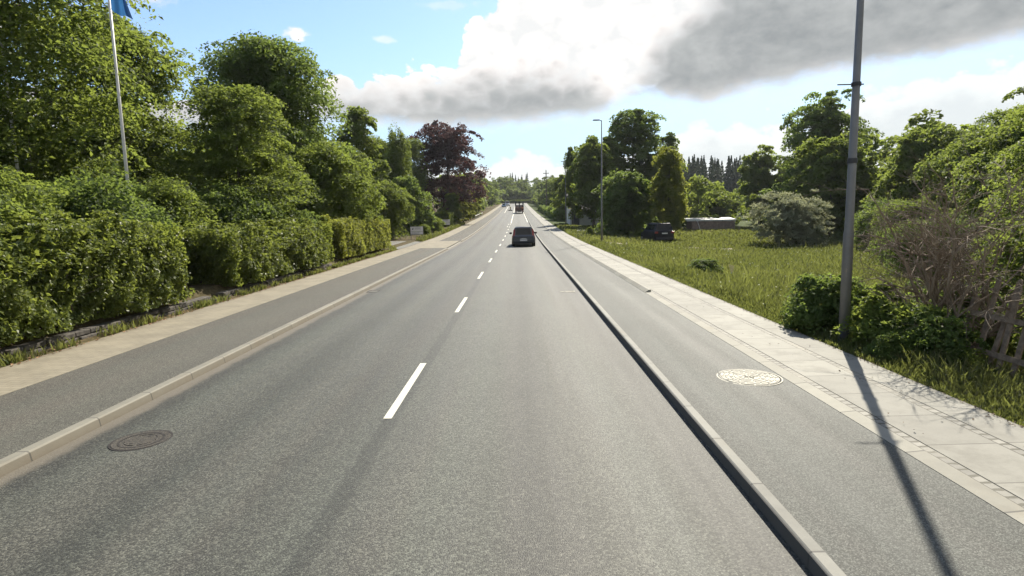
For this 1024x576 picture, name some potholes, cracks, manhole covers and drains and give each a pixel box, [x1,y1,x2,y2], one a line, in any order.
manhole cover [716,369,783,386]
manhole cover [108,430,173,451]
